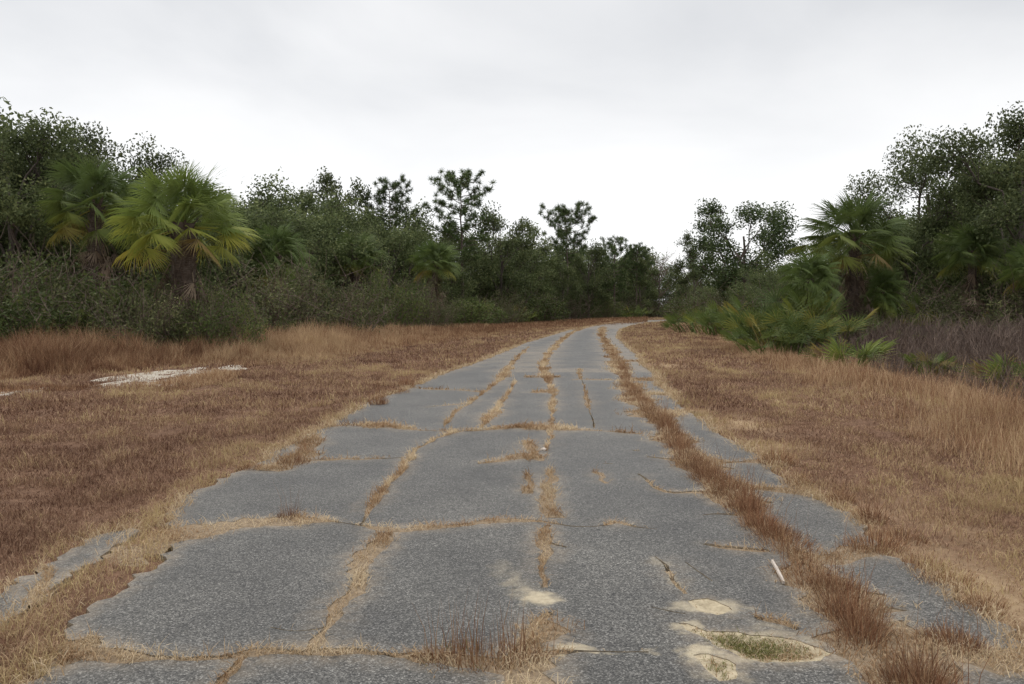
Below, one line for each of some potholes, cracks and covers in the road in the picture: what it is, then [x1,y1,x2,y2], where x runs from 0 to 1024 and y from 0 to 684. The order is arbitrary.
pothole [691,653,738,681]
crack [0,318,1024,684]
pothole [688,598,731,615]
pothole [681,622,834,663]
